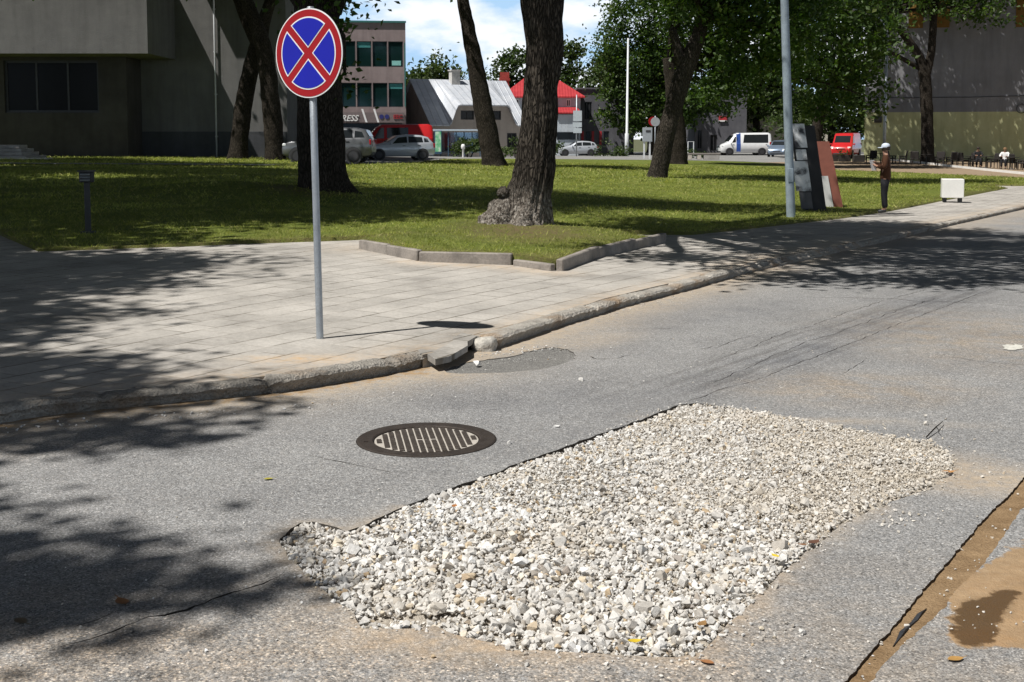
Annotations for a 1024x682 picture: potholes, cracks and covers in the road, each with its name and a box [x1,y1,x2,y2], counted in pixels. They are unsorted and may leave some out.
manhole cover [356,422,496,458]
crack [60,572,284,647]
pothole [279,403,939,542]
